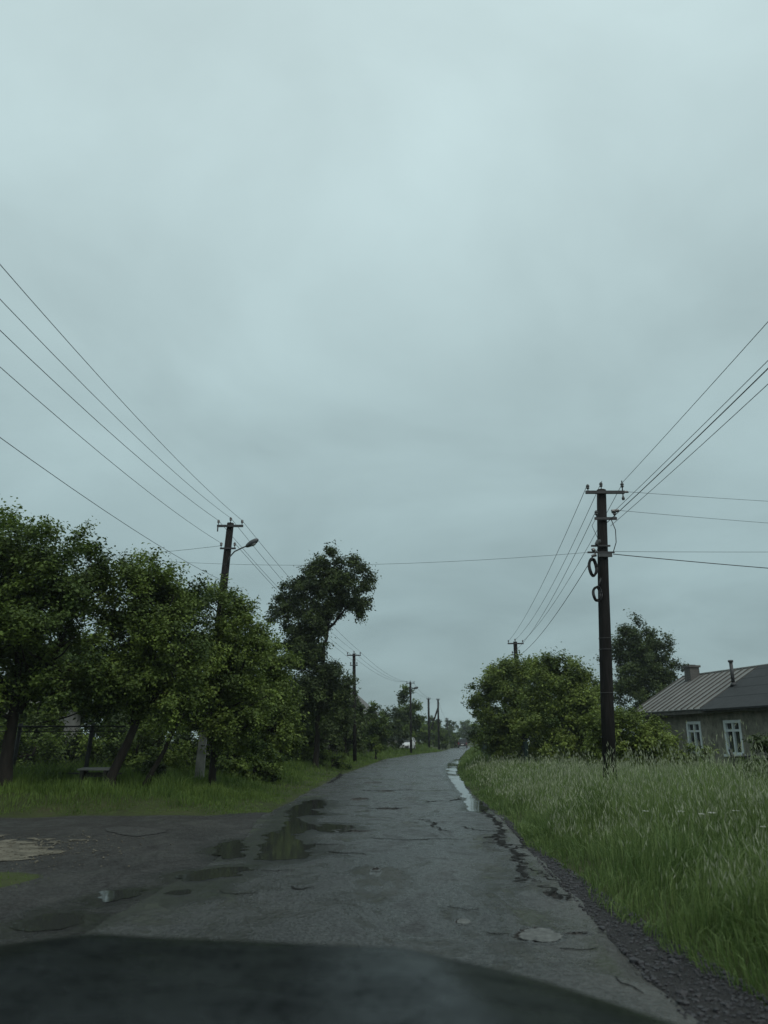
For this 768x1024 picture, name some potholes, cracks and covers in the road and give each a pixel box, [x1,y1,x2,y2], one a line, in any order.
crack [328,789,571,900]
